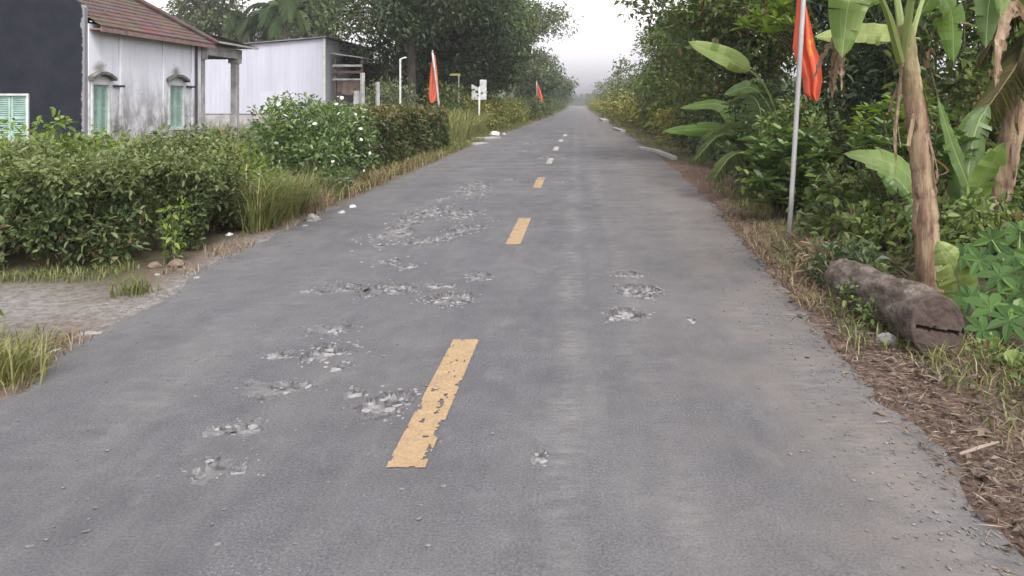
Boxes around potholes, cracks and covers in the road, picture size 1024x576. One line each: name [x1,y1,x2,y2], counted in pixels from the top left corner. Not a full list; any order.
pothole [261,349,303,360]
pothole [607,269,649,279]
pothole [232,378,318,406]
pothole [351,200,458,251]
pothole [602,306,655,326]
pothole [361,256,409,267]
pothole [342,386,369,400]
pothole [391,263,427,271]
pothole [324,361,353,373]
pothole [530,448,549,468]
pothole [353,385,428,424]
pothole [379,221,493,250]
